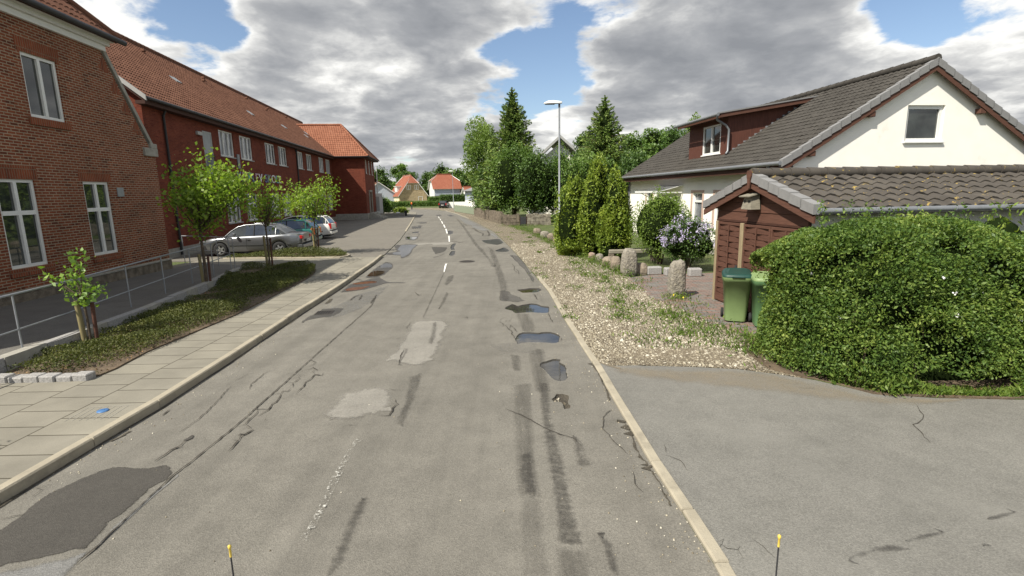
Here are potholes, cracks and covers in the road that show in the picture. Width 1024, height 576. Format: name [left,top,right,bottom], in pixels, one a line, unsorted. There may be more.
pothole [515,332,560,344]
pothole [540,359,568,381]
pothole [552,394,570,409]
crack [156,360,321,460]
pothole [505,303,549,313]
